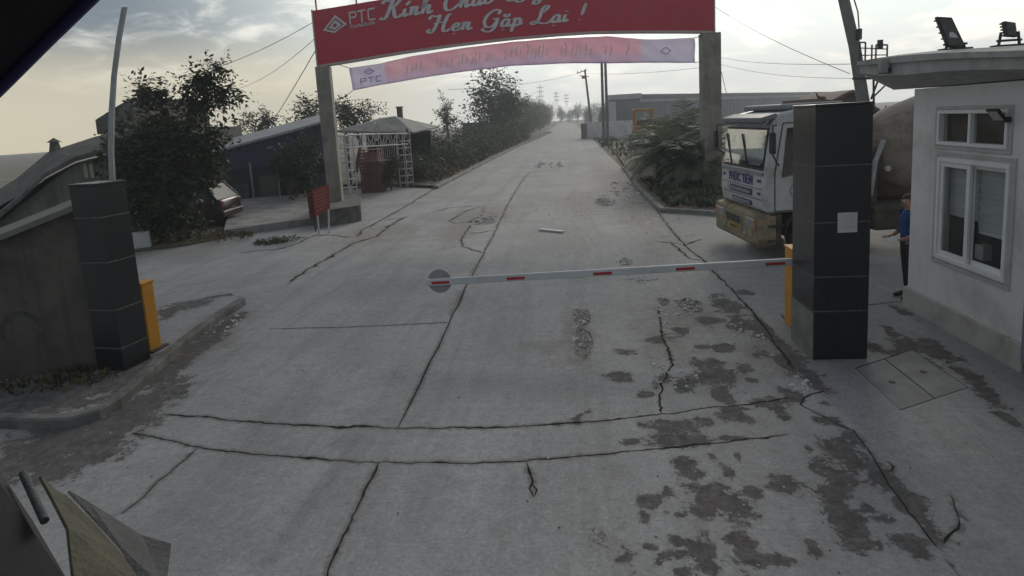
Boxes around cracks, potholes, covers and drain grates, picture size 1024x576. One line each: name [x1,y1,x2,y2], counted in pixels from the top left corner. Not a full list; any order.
crack [242,189,434,282]
crack [121,308,788,514]
pothole [571,309,591,328]
pothole [675,298,703,313]
crack [433,206,504,254]
manhole cover [856,350,967,410]
crack [943,496,968,543]
pothole [575,328,593,361]
